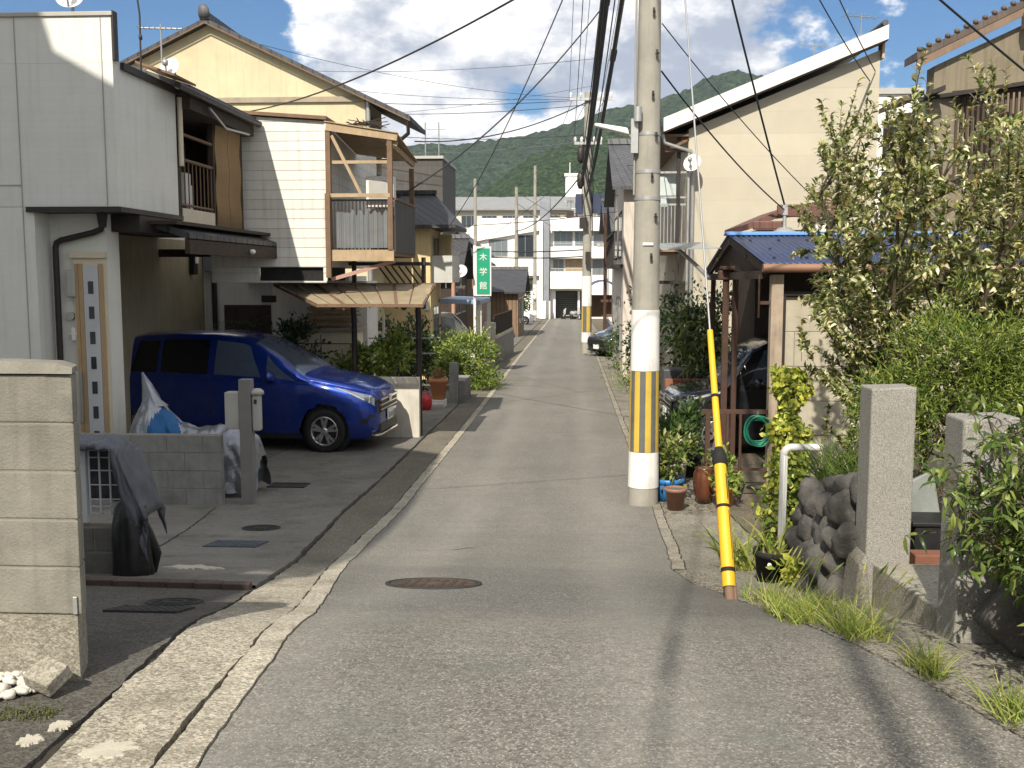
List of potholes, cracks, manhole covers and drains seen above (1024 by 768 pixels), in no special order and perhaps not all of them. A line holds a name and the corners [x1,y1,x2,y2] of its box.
manhole cover [385,577,482,589]
manhole cover [145,598,204,606]
